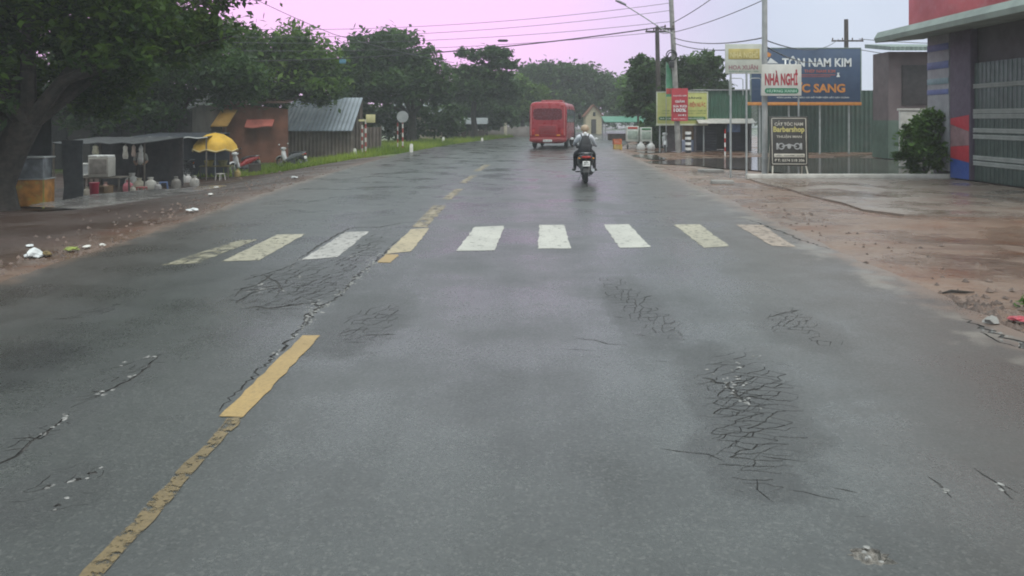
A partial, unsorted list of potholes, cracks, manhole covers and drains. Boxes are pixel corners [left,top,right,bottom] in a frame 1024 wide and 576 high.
crack [219,221,418,412]
crack [661,351,856,500]
crack [570,279,684,363]
pothole [846,545,898,566]
crack [974,468,1016,500]
crack [0,348,177,511]
crack [961,318,1024,349]
crack [929,477,952,498]
